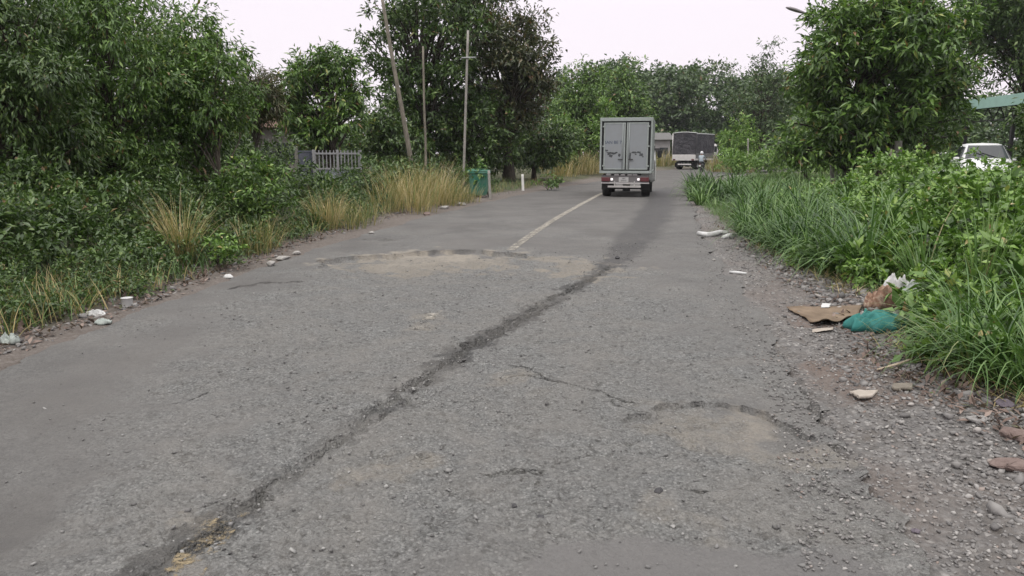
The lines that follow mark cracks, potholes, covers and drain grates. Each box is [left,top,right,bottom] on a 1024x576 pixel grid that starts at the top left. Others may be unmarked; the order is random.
crack [140,264,650,576]
